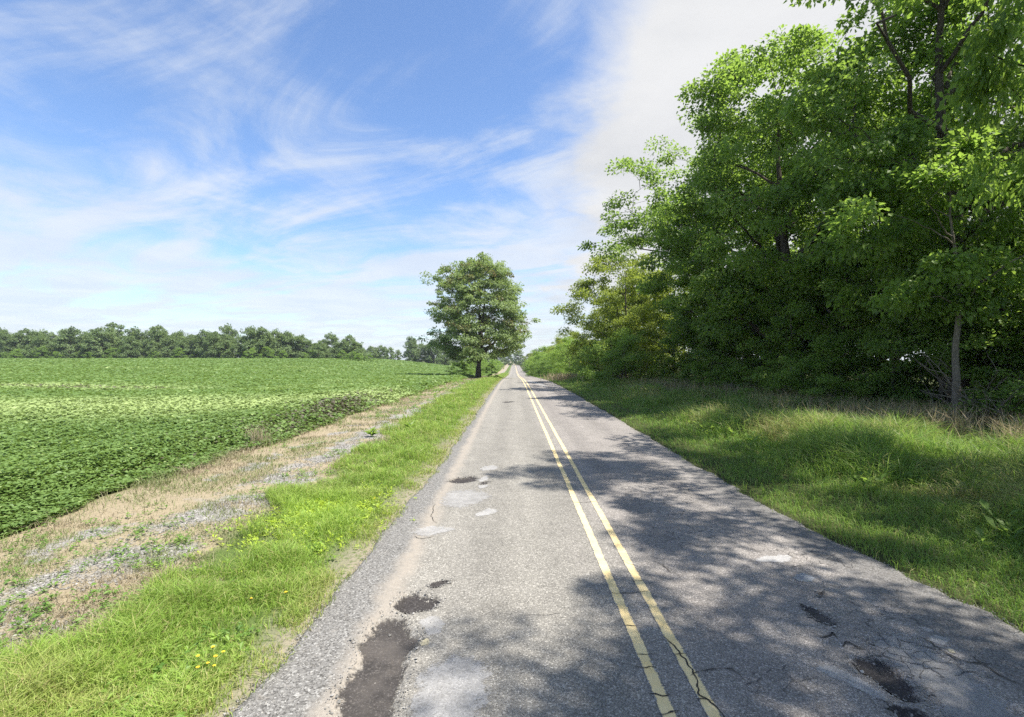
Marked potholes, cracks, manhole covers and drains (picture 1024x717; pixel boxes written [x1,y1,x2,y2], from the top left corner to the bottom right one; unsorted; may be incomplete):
pothole [393,593,440,614]
pothole [800,604,838,625]
crack [811,582,1022,697]
pothole [852,658,920,702]
crack [636,637,813,717]
